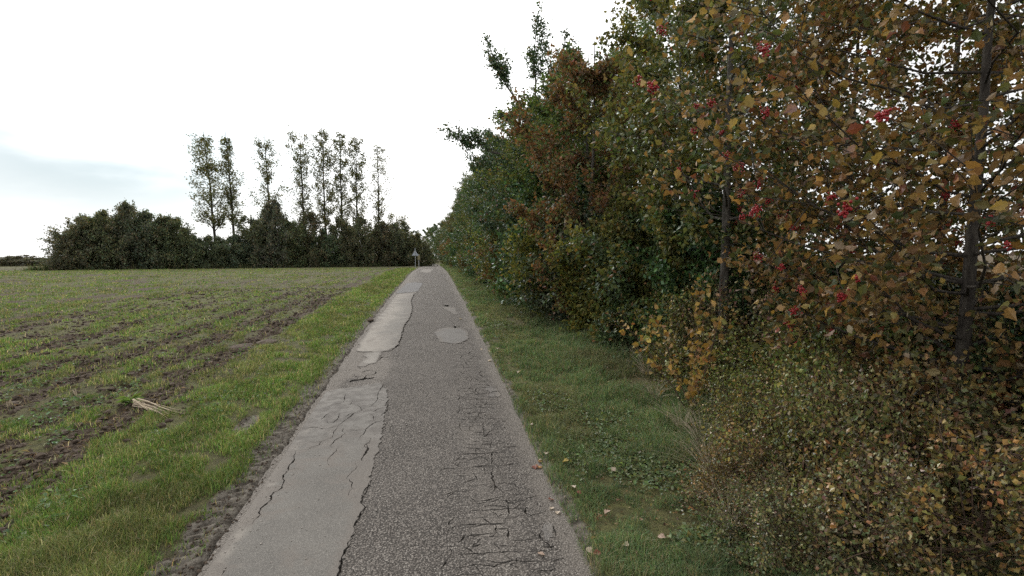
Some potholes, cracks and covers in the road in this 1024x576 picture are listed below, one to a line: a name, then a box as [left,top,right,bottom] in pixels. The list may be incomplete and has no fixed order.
crack [430,344,564,576]
crack [306,295,414,576]
crack [252,451,298,524]
